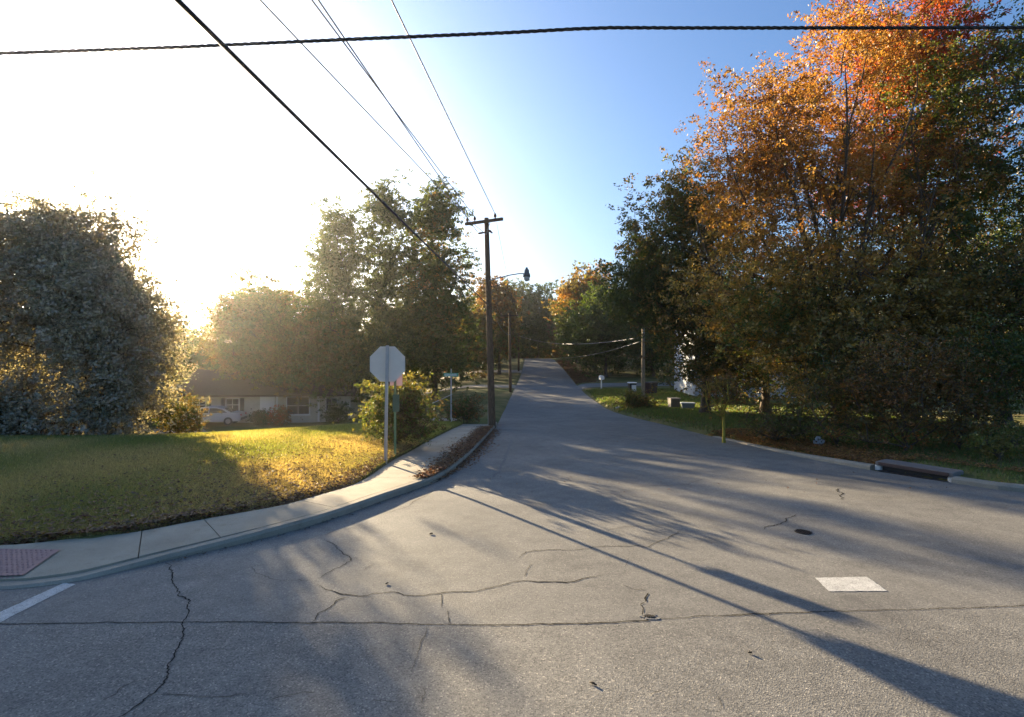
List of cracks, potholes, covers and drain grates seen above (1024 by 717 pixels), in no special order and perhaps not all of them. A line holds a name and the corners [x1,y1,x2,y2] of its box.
crack [103,562,248,717]
crack [252,525,683,622]
